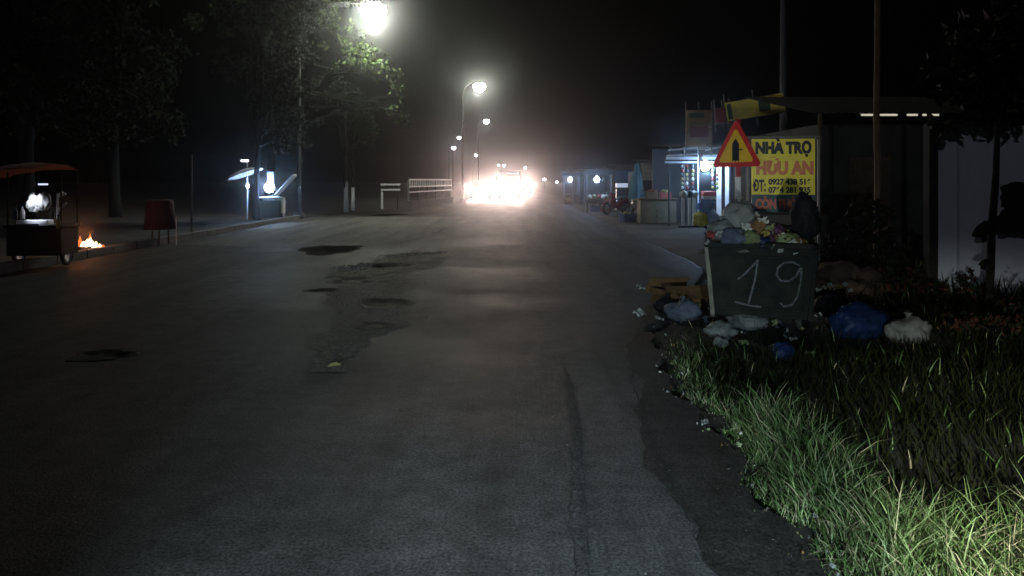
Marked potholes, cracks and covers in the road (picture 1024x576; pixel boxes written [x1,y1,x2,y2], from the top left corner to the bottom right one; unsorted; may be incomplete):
pothole [358,298,416,309]
pothole [65,349,140,362]
pothole [296,245,363,256]
